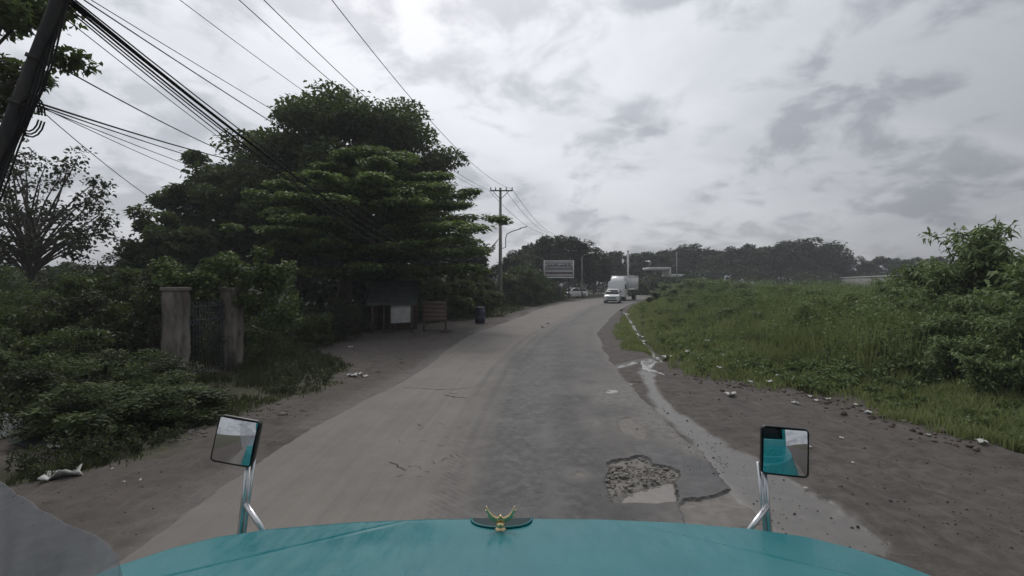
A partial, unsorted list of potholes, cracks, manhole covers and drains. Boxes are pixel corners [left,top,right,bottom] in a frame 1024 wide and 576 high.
pothole [598,455,681,504]
